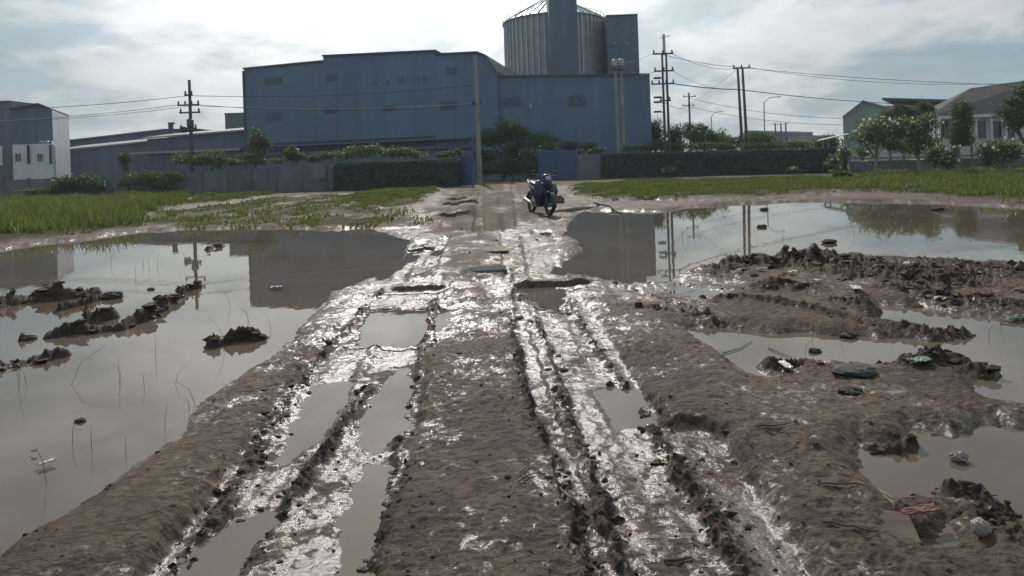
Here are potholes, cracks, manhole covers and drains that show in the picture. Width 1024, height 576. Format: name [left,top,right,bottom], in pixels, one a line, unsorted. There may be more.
pothole [510,277,583,313]
pothole [344,305,439,351]
